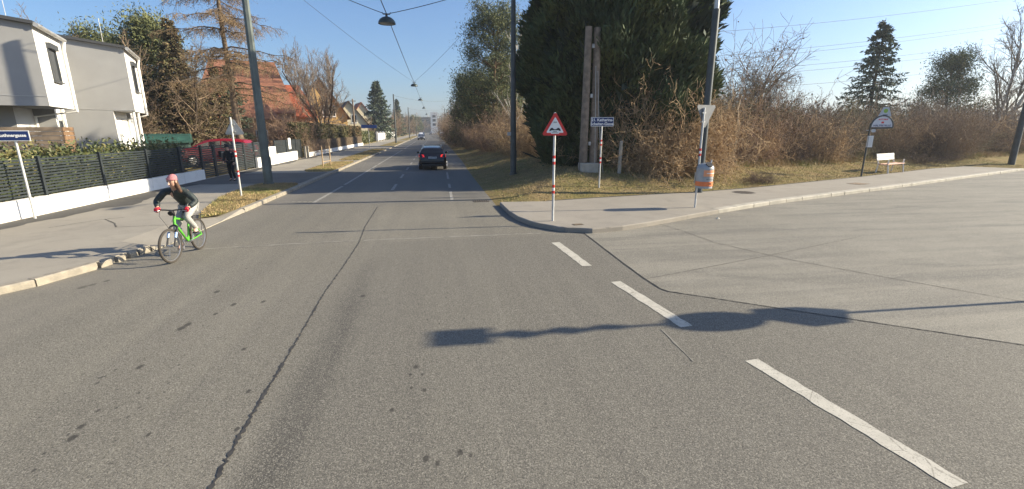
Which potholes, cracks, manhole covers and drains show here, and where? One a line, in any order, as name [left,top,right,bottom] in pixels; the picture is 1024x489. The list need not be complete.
crack [207,208,377,489]
